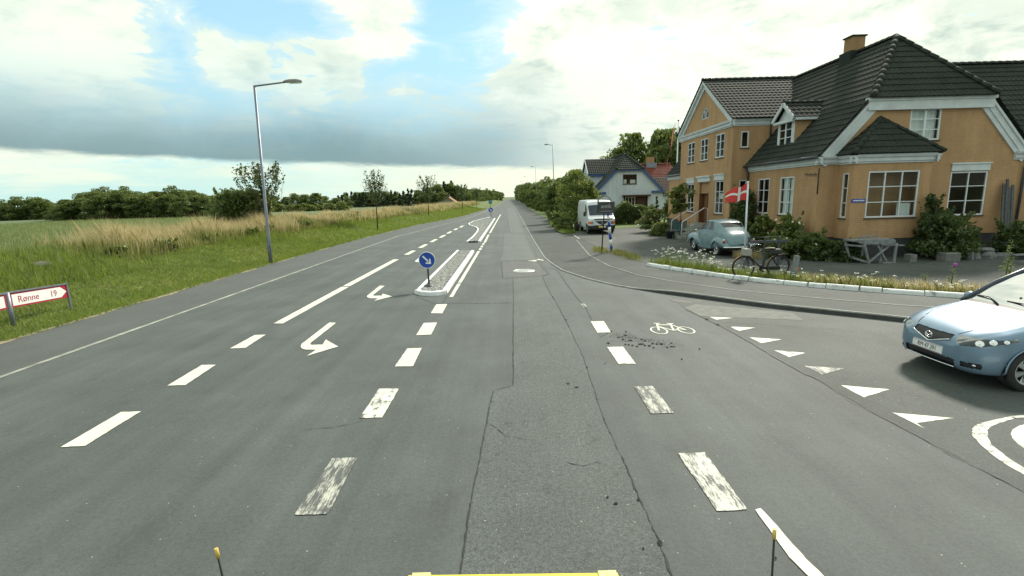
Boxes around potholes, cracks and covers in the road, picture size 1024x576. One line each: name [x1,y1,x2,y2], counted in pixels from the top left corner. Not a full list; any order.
crack [459,221,535,575]
crack [542,267,673,576]
